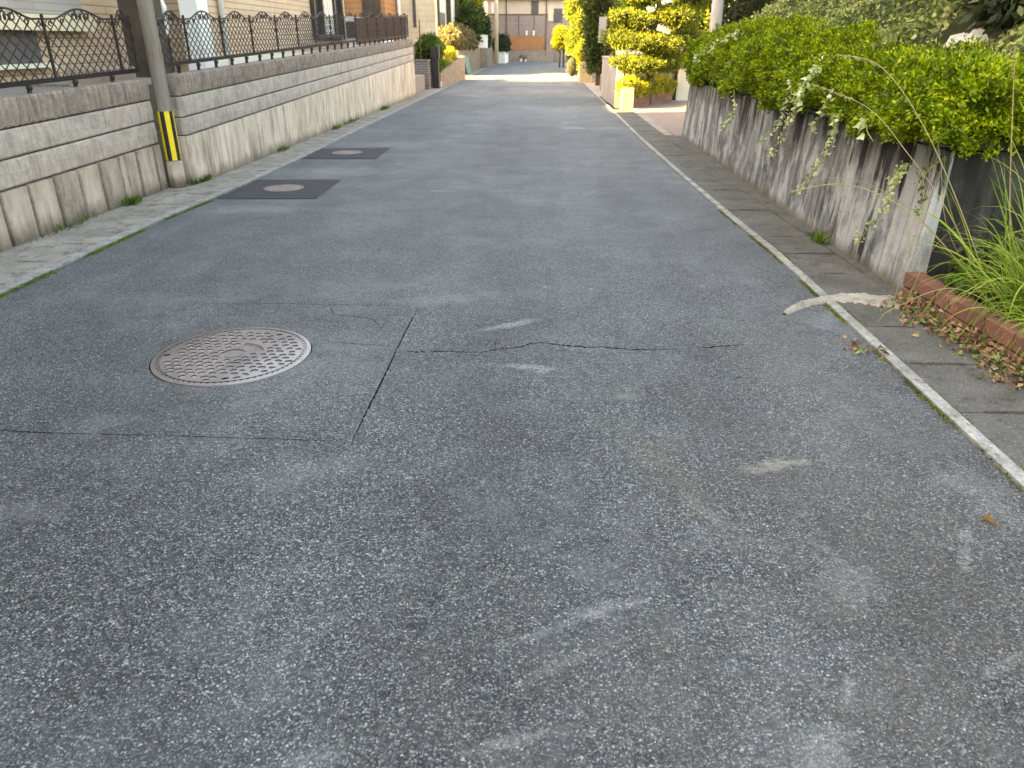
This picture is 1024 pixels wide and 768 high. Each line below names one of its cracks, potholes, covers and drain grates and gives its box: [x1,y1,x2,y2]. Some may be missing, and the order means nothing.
manhole cover [149,327,312,387]
crack [410,342,744,353]
manhole cover [263,184,304,192]
